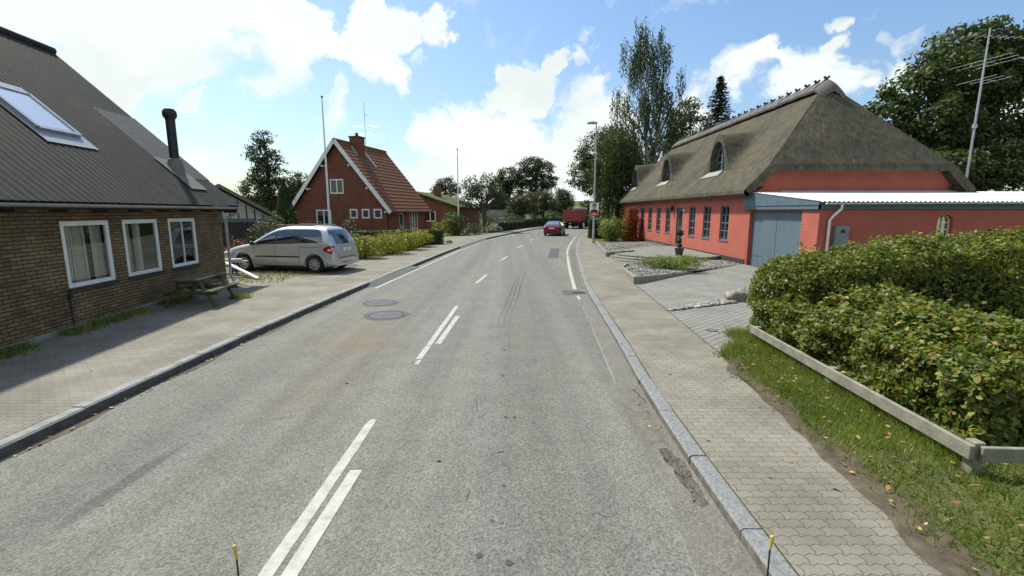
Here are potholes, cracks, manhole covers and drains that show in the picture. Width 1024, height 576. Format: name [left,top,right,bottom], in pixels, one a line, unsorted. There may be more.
pothole [659,448,710,507]
manhole cover [364,310,410,320]
